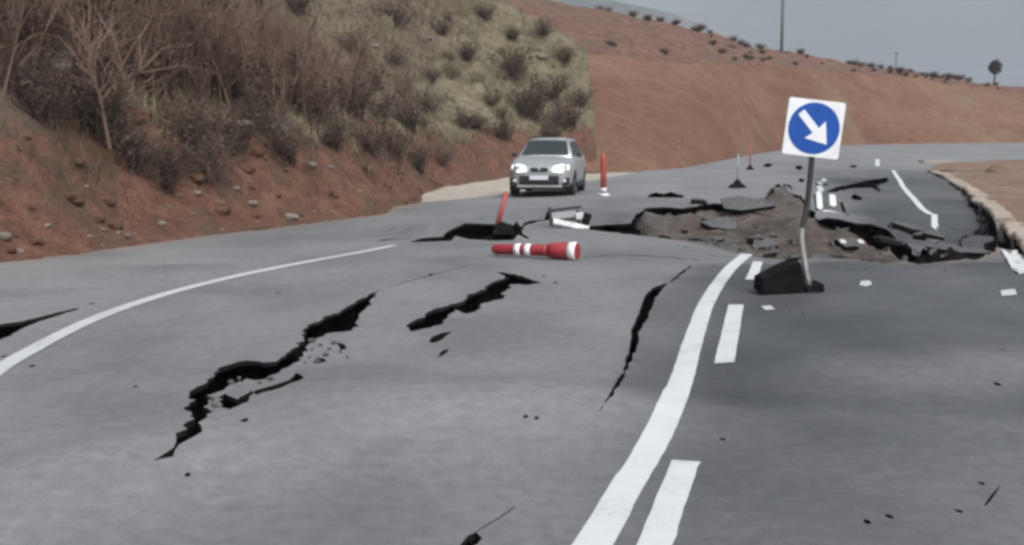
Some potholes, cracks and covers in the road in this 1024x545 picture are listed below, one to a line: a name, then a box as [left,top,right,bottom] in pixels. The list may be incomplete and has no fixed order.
crack [412,211,549,242]
crack [583,255,696,410]
crack [474,507,515,534]
crack [0,308,78,340]
crack [154,266,540,460]
crack [984,486,1000,506]
